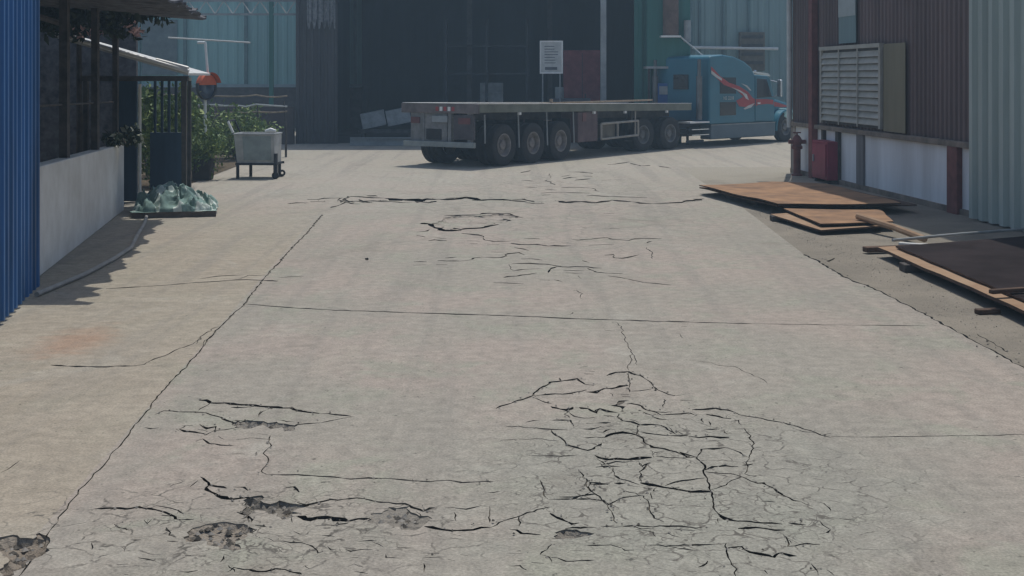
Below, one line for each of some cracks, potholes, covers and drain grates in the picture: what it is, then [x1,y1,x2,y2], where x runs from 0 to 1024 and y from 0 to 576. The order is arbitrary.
pothole [0,533,50,576]
pothole [242,495,309,521]
crack [52,327,216,367]
pothole [232,420,296,431]
pothole [183,522,253,551]
crack [91,366,850,576]
crack [415,162,668,314]
